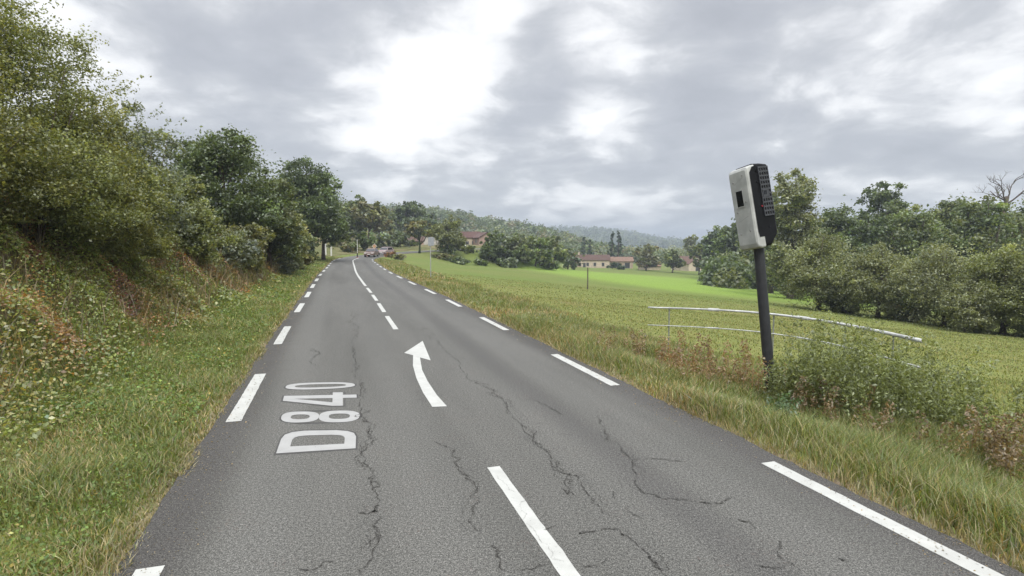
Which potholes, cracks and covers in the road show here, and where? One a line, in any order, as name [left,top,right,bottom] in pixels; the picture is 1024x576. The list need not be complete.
crack [349,311,394,572]
crack [420,328,756,576]
